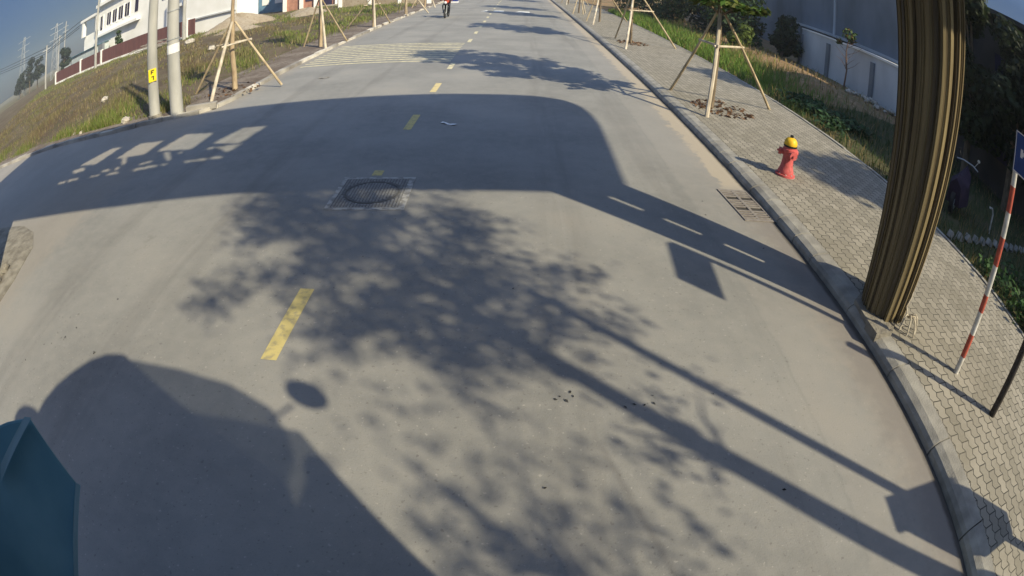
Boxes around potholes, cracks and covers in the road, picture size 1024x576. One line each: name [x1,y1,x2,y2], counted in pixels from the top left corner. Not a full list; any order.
drain grate [717,189,776,223]
manhole cover [323,177,416,210]
